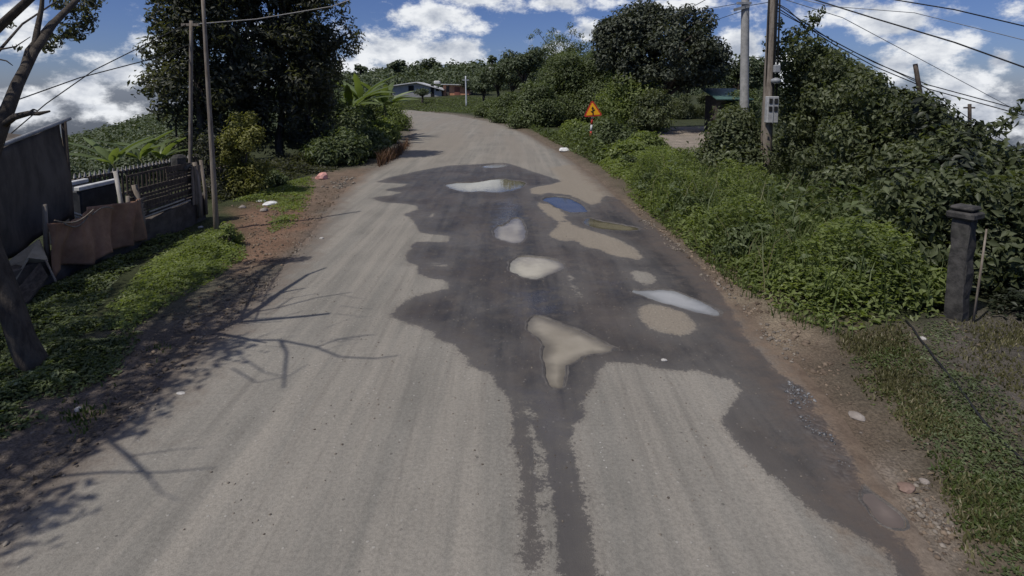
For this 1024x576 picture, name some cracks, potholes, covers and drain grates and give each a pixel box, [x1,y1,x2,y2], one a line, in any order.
pothole [444,178,527,193]
pothole [541,195,591,213]
pothole [629,288,723,317]
pothole [525,314,620,390]
pothole [507,255,567,280]
pothole [491,217,529,244]
pothole [582,217,642,231]
